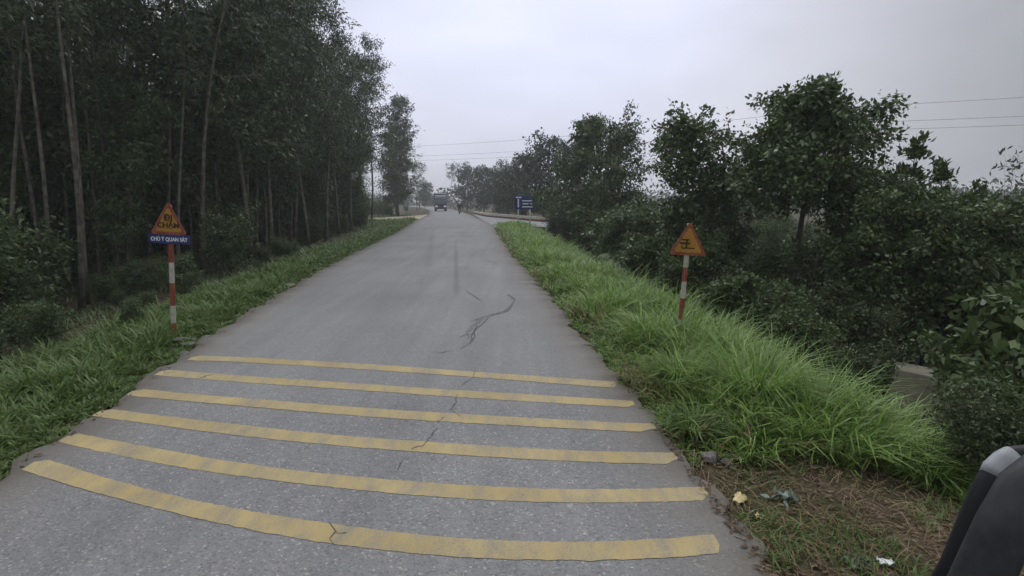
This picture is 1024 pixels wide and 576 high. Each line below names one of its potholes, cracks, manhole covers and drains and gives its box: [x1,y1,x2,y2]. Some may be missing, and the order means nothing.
crack [441,291,515,353]
